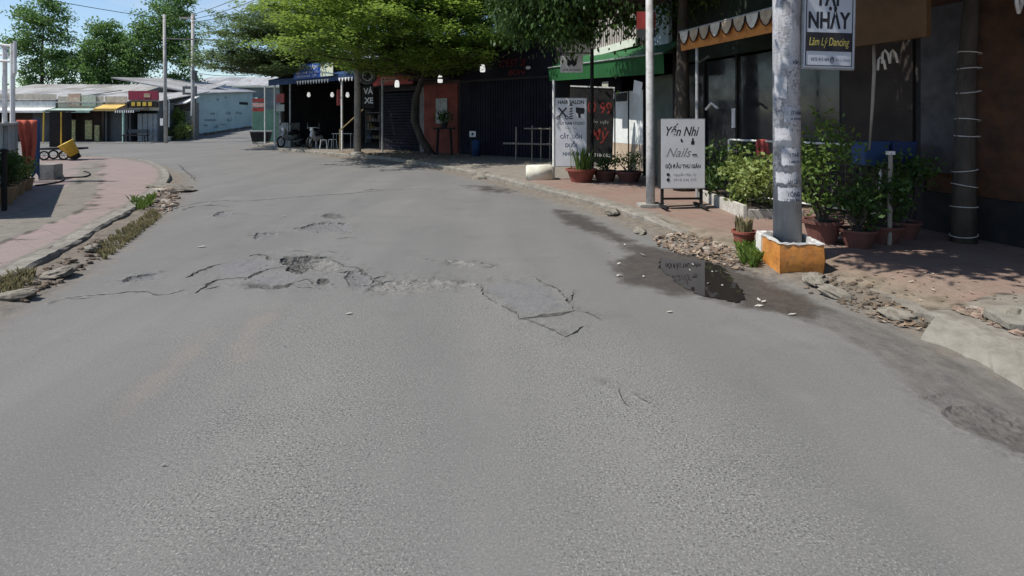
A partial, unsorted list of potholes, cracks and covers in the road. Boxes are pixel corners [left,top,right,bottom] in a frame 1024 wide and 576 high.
pothole [279,255,328,274]
pothole [122,273,160,282]
crack [481,277,600,337]
pothole [940,403,1024,454]
crack [48,237,390,304]
